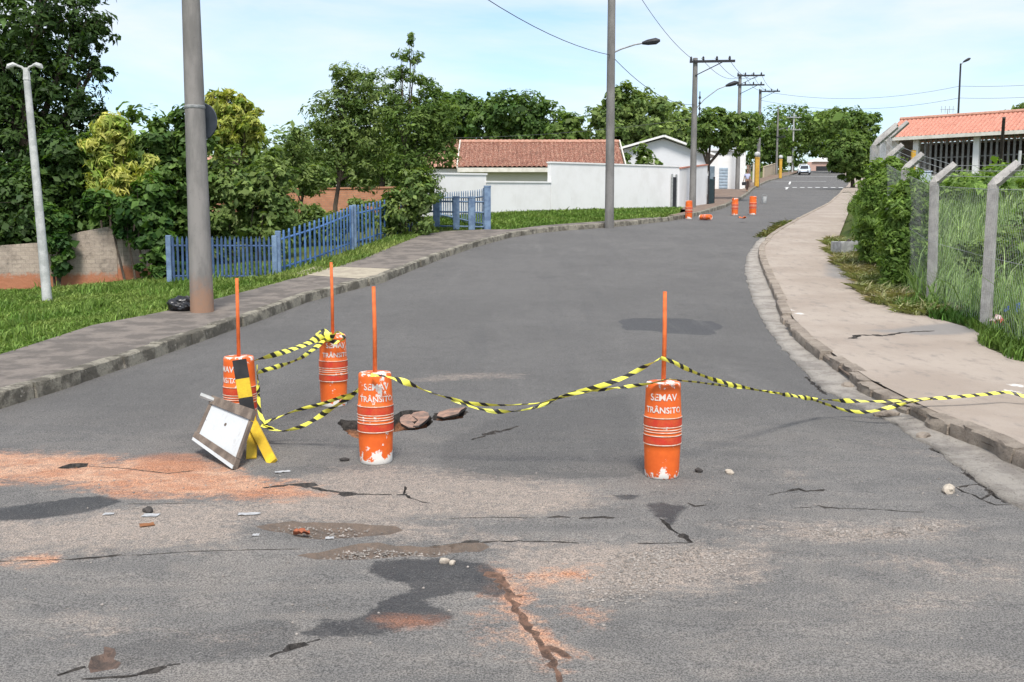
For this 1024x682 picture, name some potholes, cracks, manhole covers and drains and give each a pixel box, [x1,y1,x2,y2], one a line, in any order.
pothole [337,410,433,438]
crack [483,571,572,682]
pothole [256,521,403,539]
crack [269,638,321,658]
crack [90,466,194,474]
crack [849,331,930,339]
crack [929,448,1010,505]
crack [770,488,910,512]
crack [638,503,706,544]
pothole [298,542,489,560]
crack [471,426,518,440]
